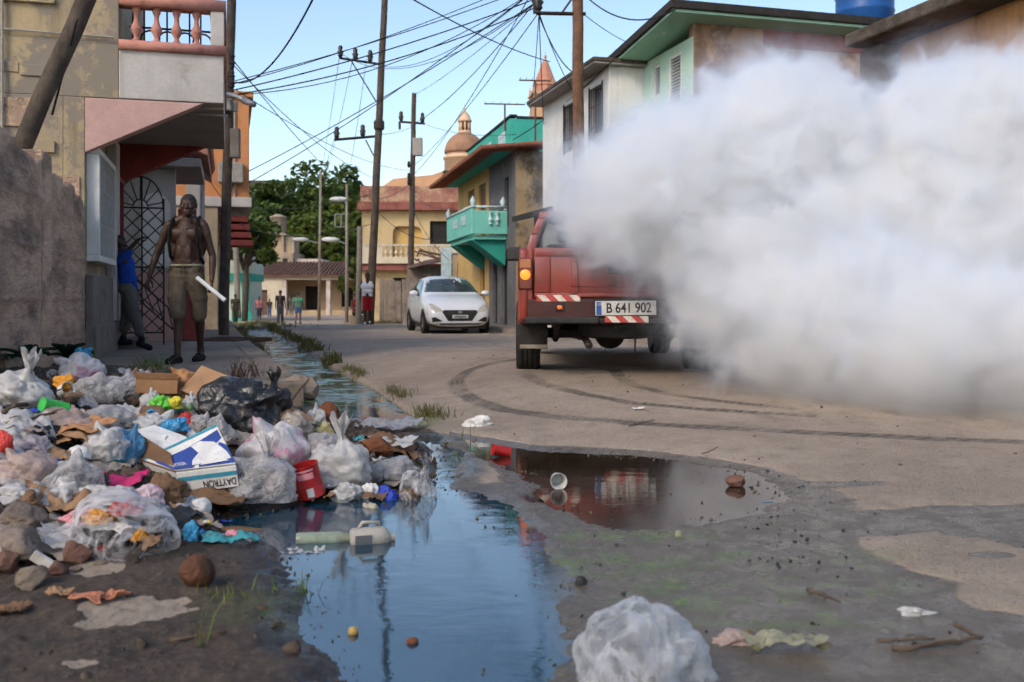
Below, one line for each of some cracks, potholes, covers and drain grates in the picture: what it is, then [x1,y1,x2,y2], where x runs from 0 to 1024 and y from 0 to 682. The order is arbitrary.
pothole [462,439,790,531]
